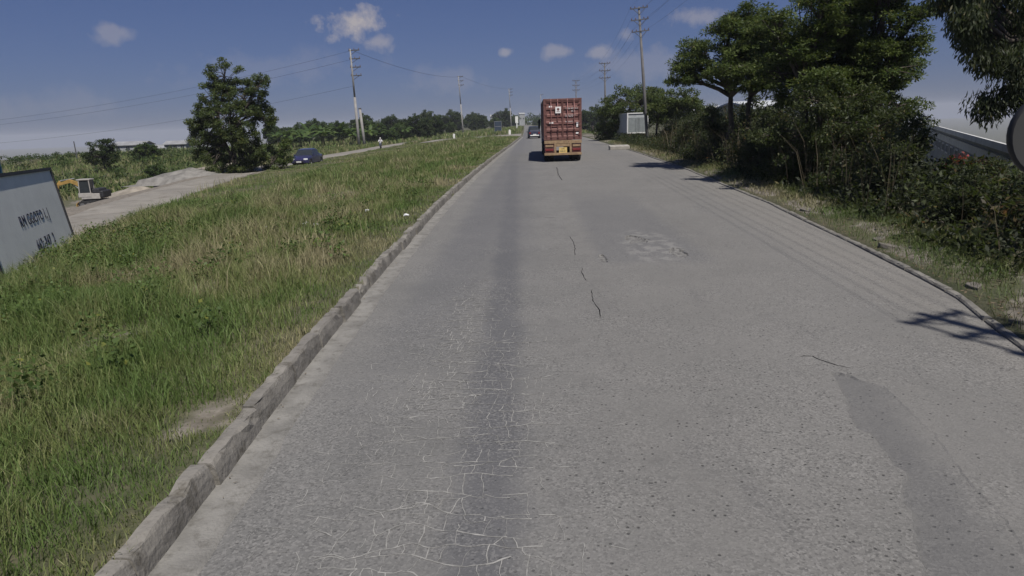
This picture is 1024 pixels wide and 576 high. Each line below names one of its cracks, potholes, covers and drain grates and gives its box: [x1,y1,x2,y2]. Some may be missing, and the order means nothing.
pothole [669,247,689,258]
crack [210,270,657,576]
pothole [625,235,649,243]
